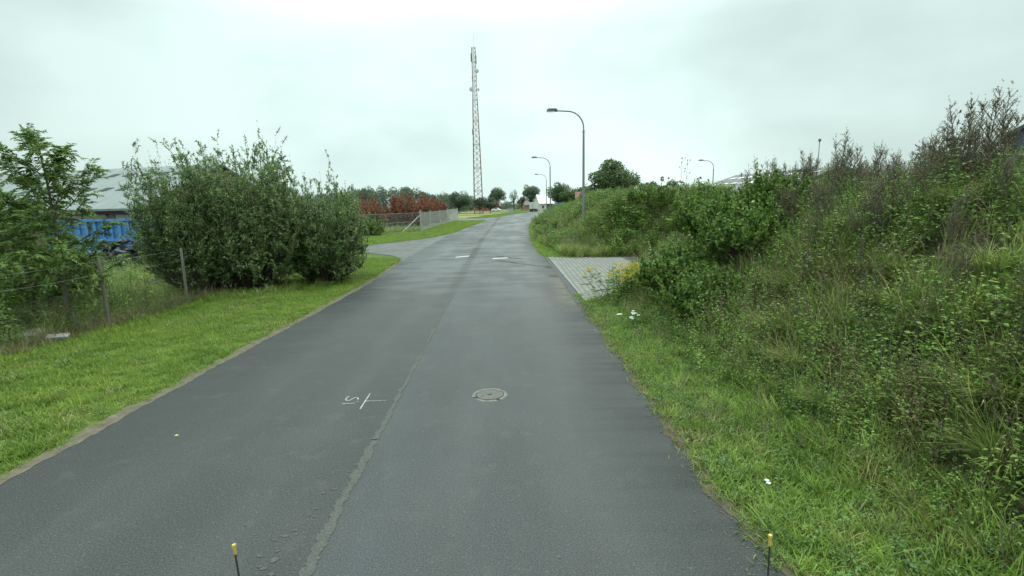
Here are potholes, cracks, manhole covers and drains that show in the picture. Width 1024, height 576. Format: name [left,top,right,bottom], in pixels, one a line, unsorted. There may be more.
manhole cover [472,388,507,402]
